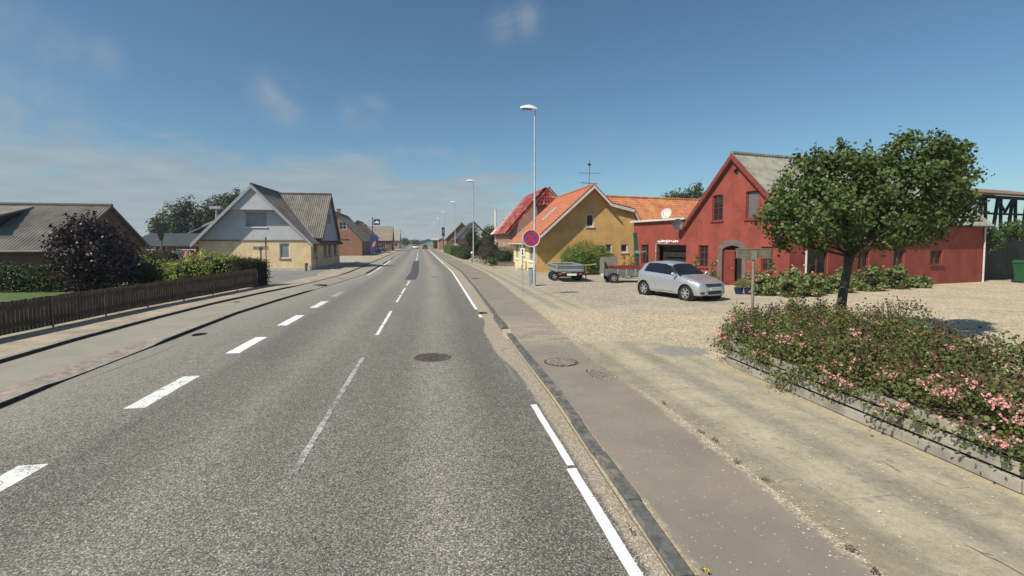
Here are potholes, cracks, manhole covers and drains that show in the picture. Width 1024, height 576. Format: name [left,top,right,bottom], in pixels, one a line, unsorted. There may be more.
manhole cover [544,358,578,367]
manhole cover [414,353,451,362]
